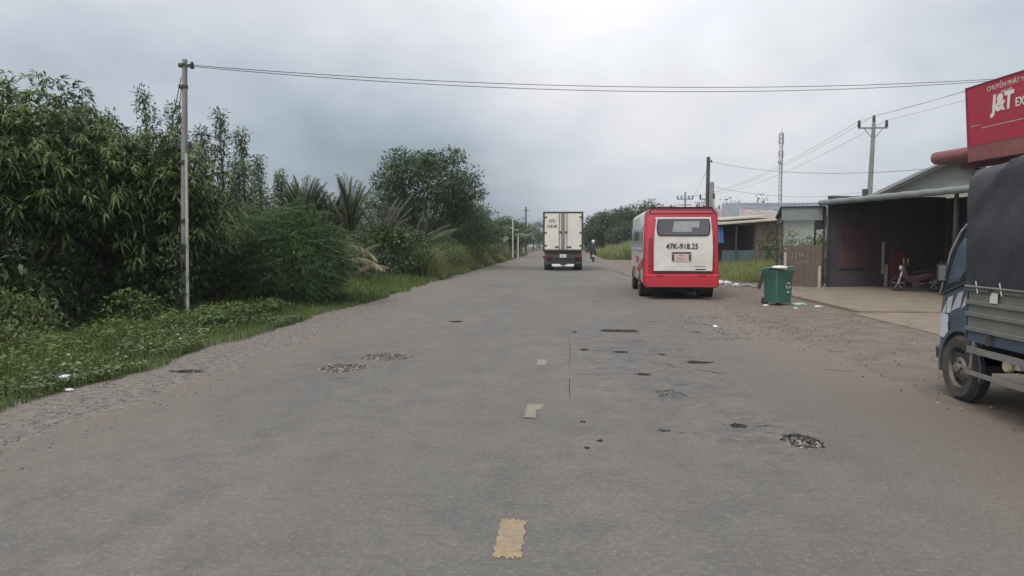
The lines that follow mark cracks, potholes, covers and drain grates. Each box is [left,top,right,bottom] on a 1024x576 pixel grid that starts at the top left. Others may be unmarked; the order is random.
pothole [356,353,412,361]
pothole [318,363,368,373]
pothole [655,389,687,400]
pothole [780,433,825,449]
